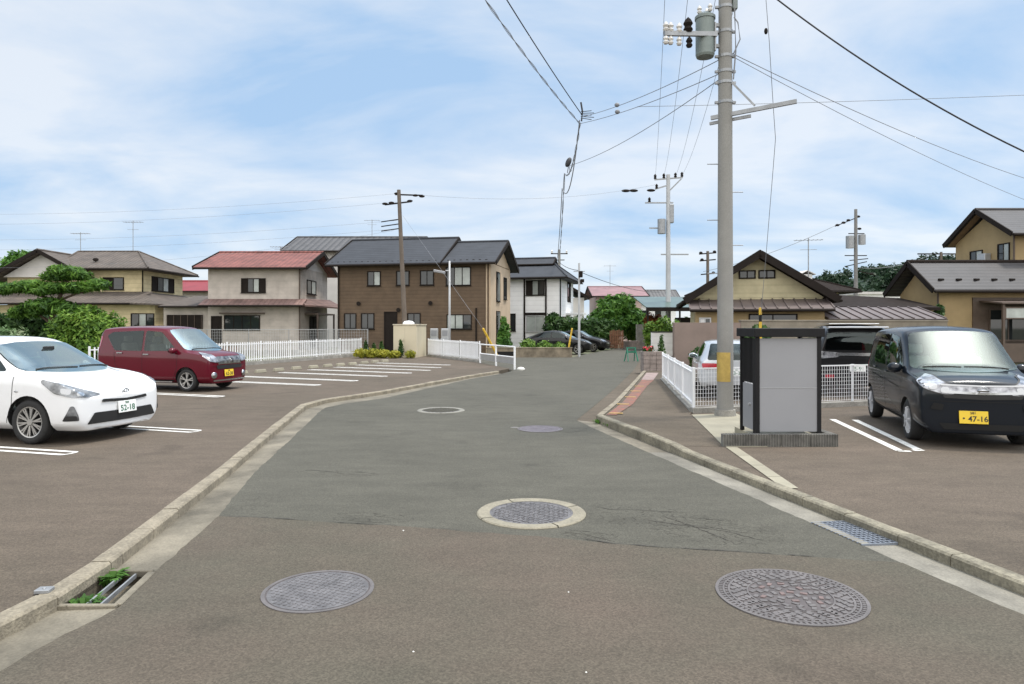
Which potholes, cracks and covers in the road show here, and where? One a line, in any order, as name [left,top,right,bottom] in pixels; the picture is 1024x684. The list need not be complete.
manhole cover [260,570,374,614]
drain grate [811,521,898,546]
manhole cover [715,569,871,627]
crack [561,503,809,556]
manhole cover [477,498,586,530]
manhole cover [517,425,563,433]
